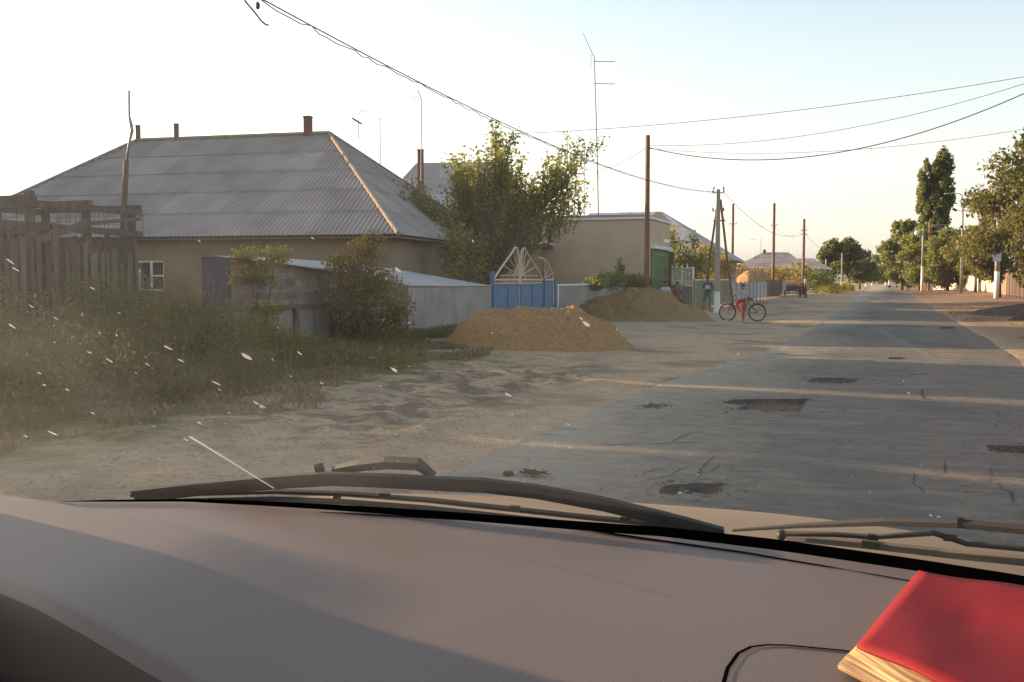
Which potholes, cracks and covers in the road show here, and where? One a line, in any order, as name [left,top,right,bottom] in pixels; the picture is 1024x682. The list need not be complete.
crack [576,425,729,481]
pothole [723,398,812,412]
pothole [986,445,1024,454]
pothole [659,483,724,495]
